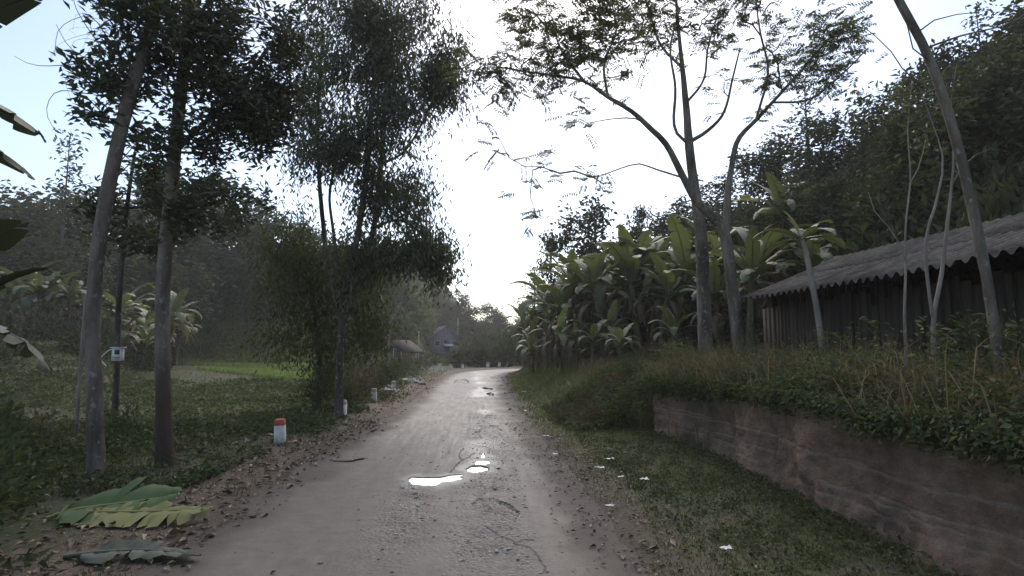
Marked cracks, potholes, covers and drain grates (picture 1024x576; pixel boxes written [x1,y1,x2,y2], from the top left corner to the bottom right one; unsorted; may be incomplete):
pothole [408,474,465,486]
crack [482,525,549,572]
pothole [465,465,489,473]
crack [450,448,475,472]
